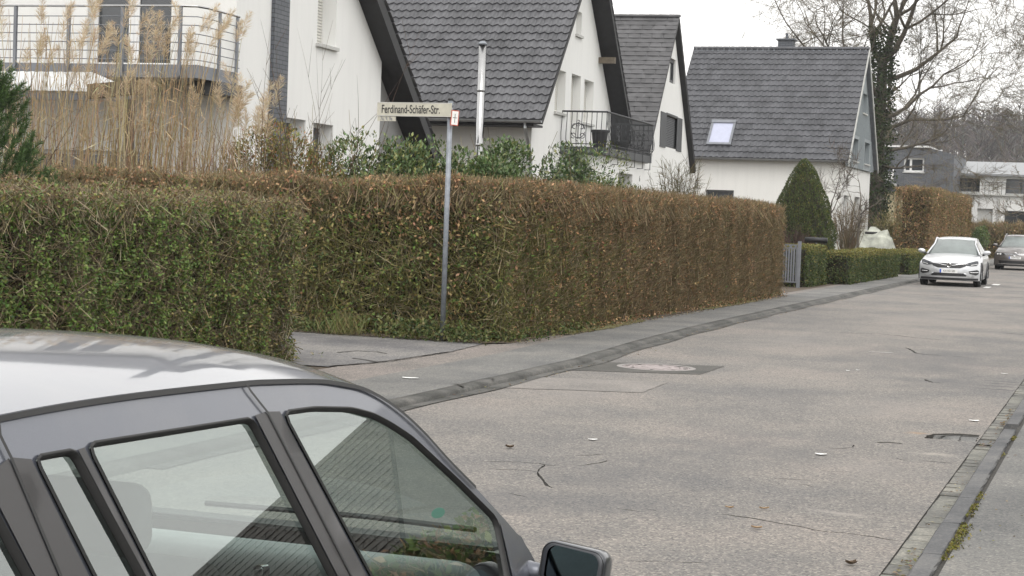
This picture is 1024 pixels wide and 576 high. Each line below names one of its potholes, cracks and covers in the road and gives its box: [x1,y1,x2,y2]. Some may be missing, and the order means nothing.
crack [331,351,449,366]
crack [482,461,555,497]
manhole cover [617,363,696,371]
crack [725,514,899,541]
